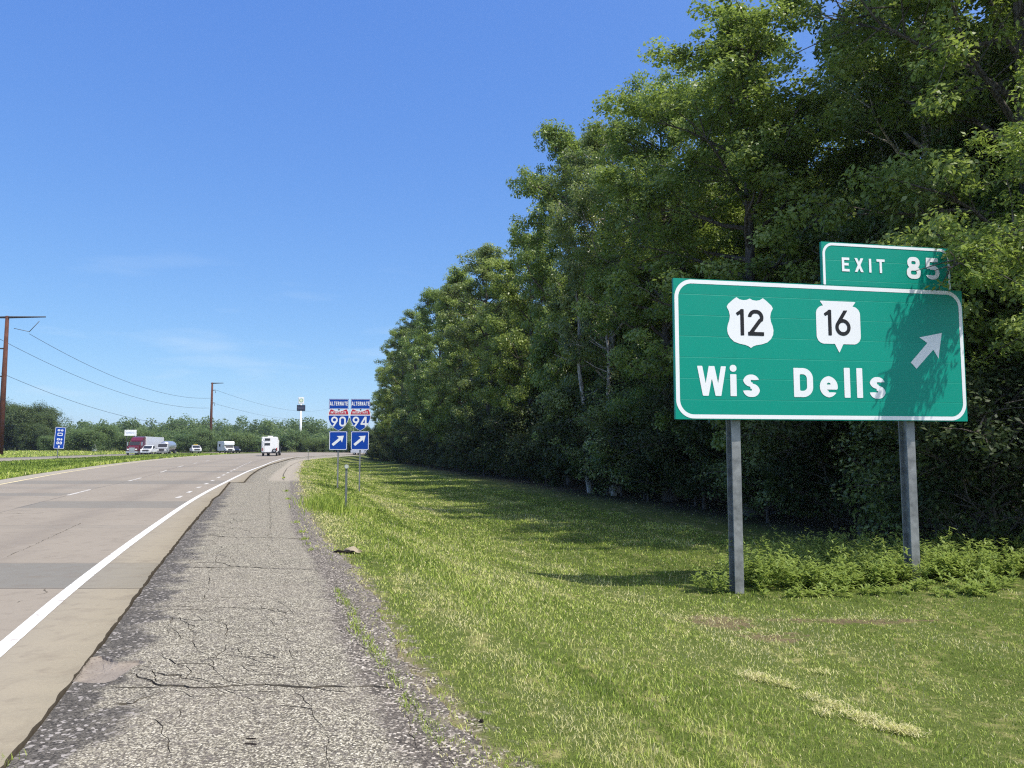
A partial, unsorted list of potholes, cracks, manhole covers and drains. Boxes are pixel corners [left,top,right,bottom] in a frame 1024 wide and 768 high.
crack [108,463,454,768]
